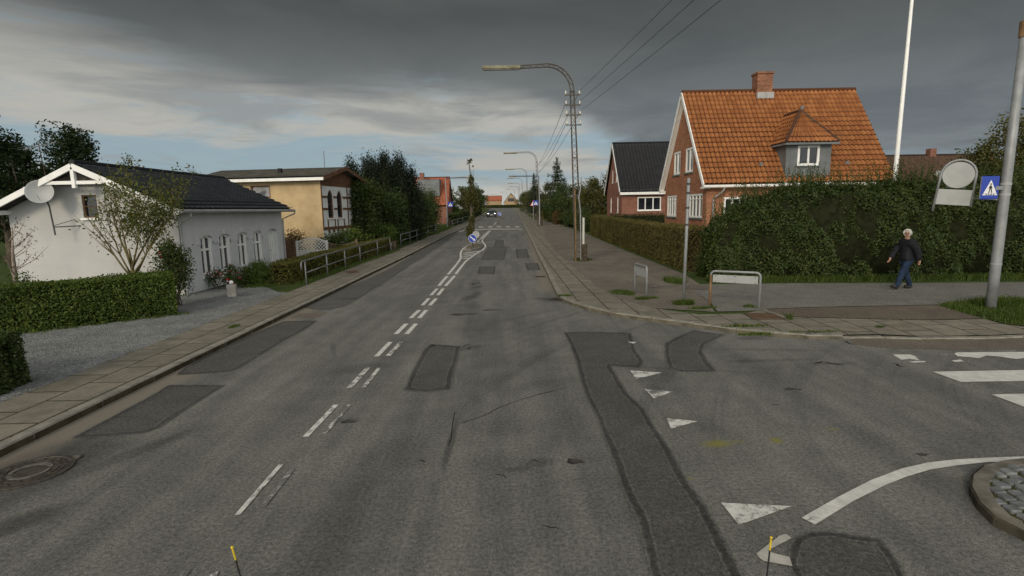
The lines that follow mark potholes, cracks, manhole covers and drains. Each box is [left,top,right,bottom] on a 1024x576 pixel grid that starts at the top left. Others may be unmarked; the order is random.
crack [448,388,565,446]
manhole cover [0,455,76,491]
